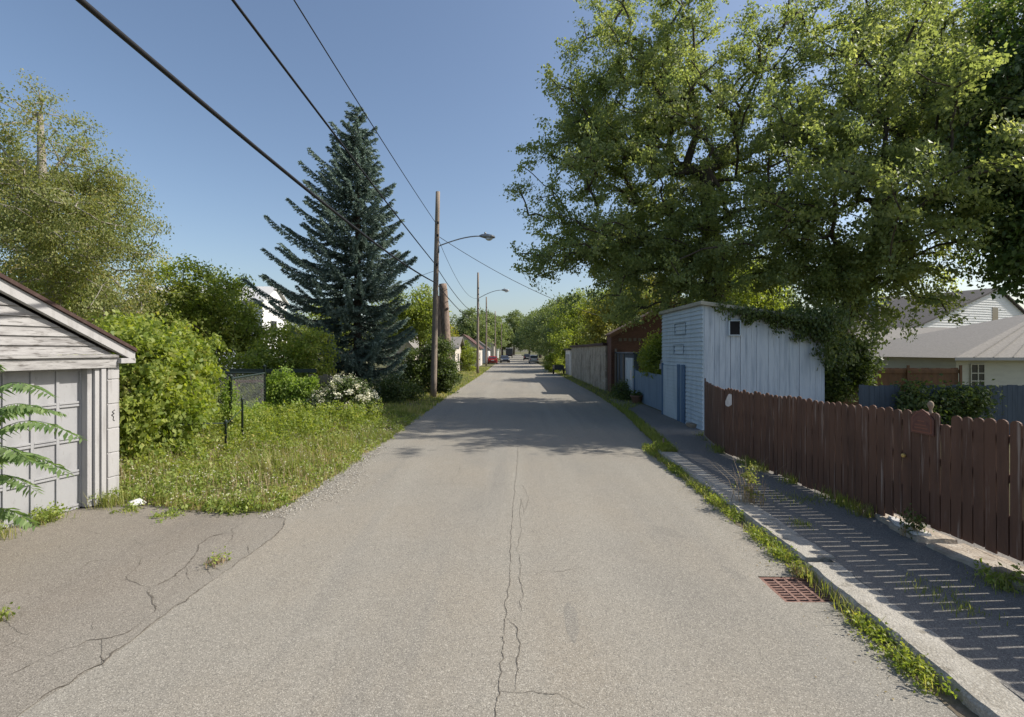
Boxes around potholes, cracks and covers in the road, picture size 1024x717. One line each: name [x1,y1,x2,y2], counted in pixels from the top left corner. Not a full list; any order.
crack [435,466,583,717]
drain grate [759,577,837,602]
crack [6,516,286,716]
